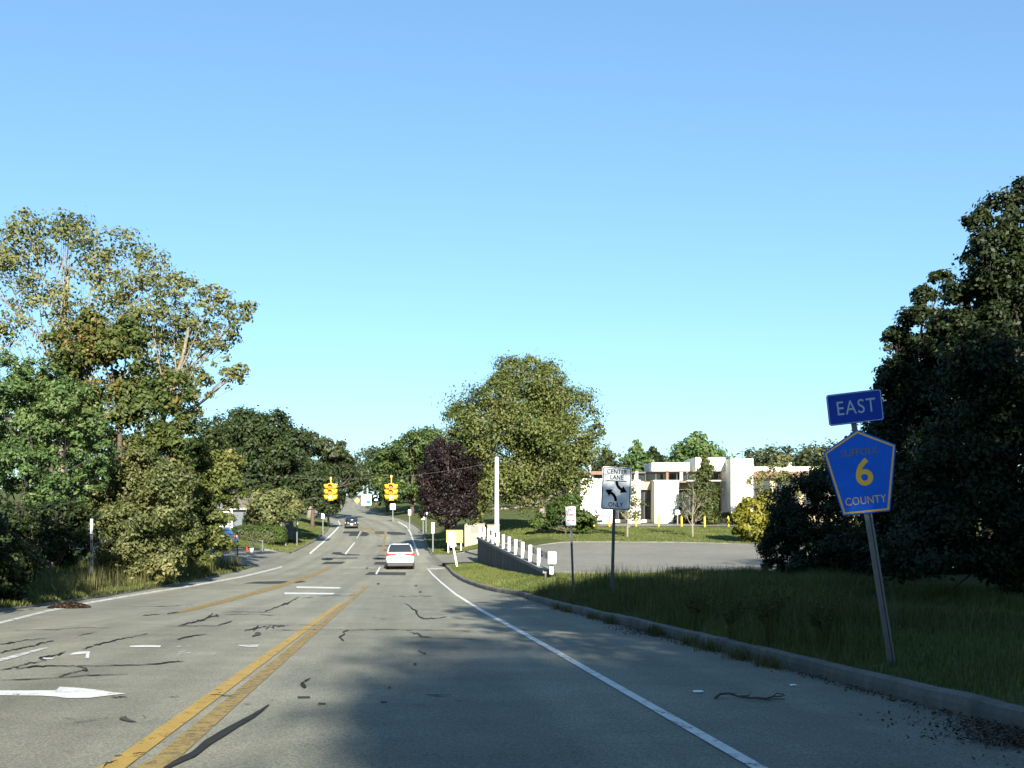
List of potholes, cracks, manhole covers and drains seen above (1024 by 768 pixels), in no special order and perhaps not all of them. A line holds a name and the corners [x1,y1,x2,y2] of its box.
crack [143,604,265,626]
crack [305,617,483,639]
